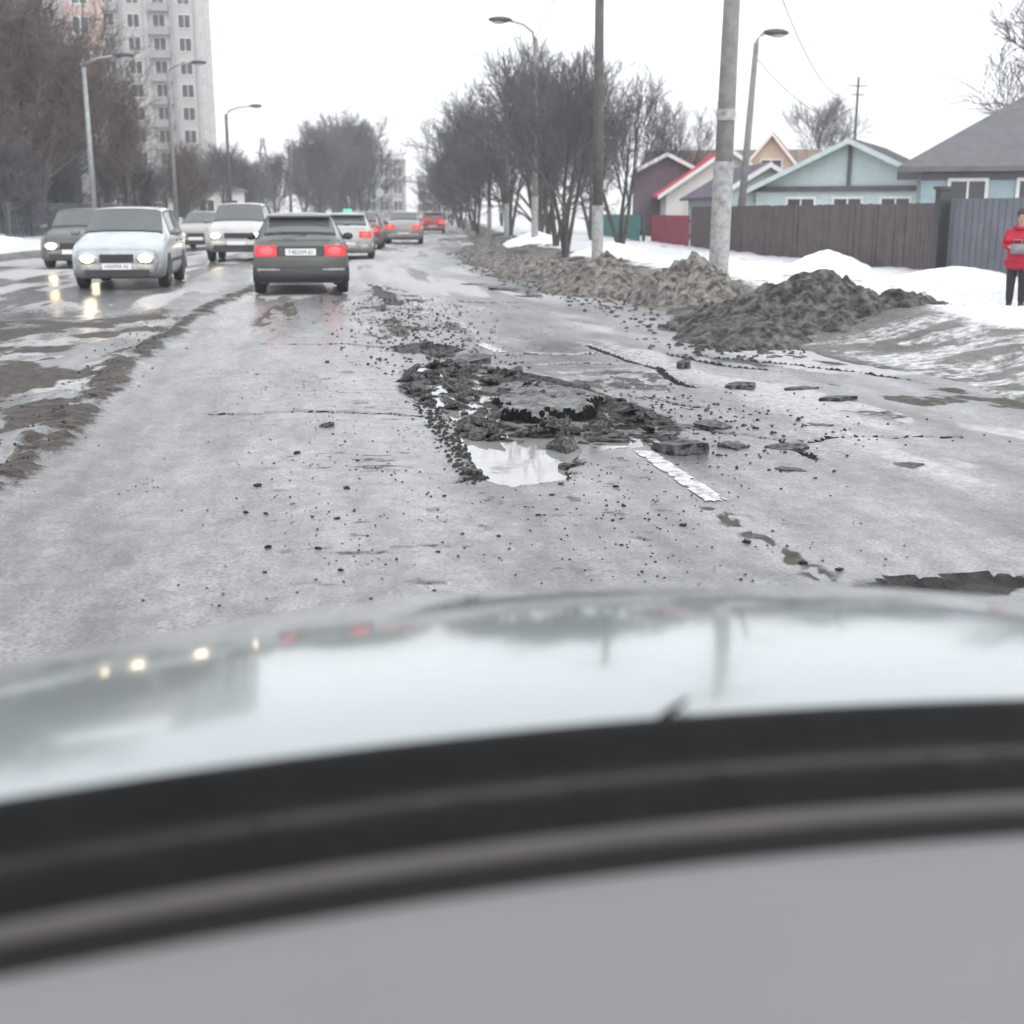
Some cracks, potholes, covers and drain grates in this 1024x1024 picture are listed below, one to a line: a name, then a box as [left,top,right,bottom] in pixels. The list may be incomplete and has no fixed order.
crack [209,410,444,418]
pothole [397,366,683,481]
pothole [853,570,1024,596]
pothole [367,284,404,306]
crack [491,344,919,409]
pothole [390,343,465,357]
